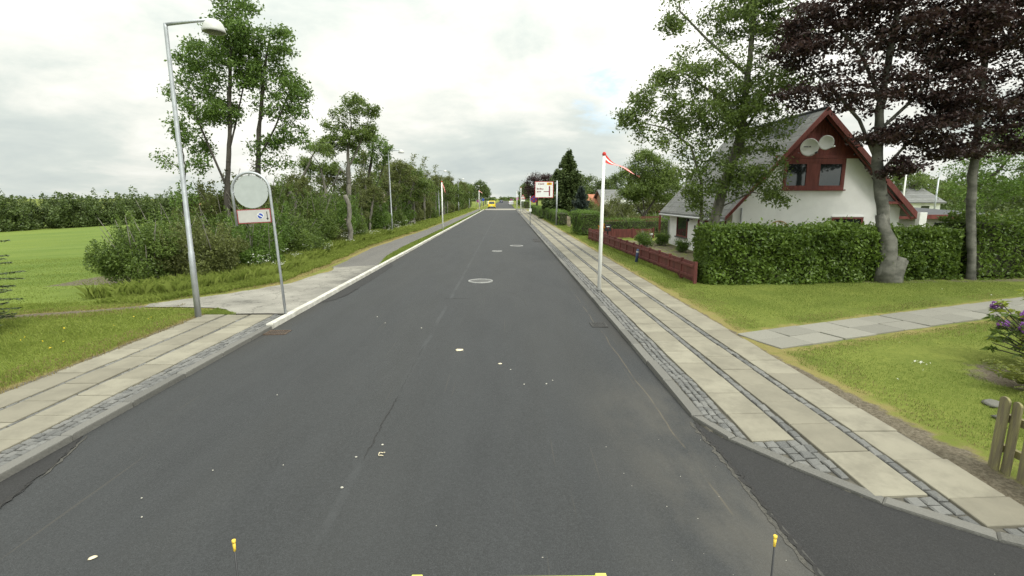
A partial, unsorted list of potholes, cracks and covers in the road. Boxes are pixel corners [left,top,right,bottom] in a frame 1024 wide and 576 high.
crack [364,349,422,458]
crack [0,435,87,508]
